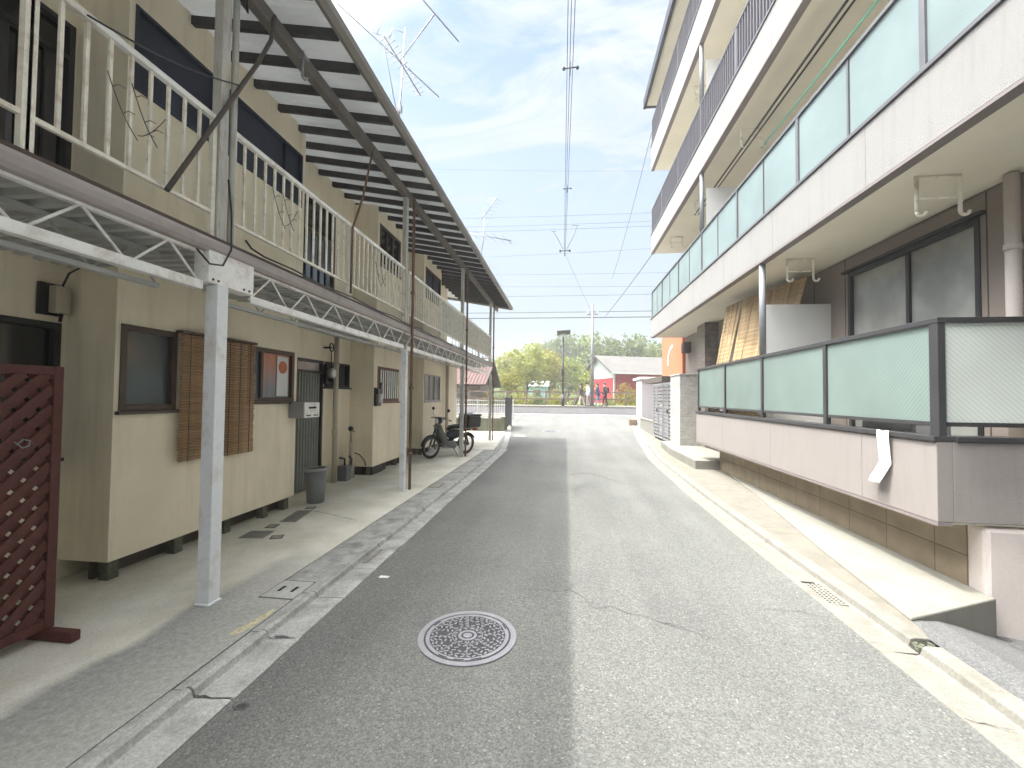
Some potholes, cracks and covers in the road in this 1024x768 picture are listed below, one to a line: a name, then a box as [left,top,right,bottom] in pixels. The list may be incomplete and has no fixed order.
manhole cover [418,611,517,667]
drain grate [800,581,849,607]
crack [519,583,715,639]
